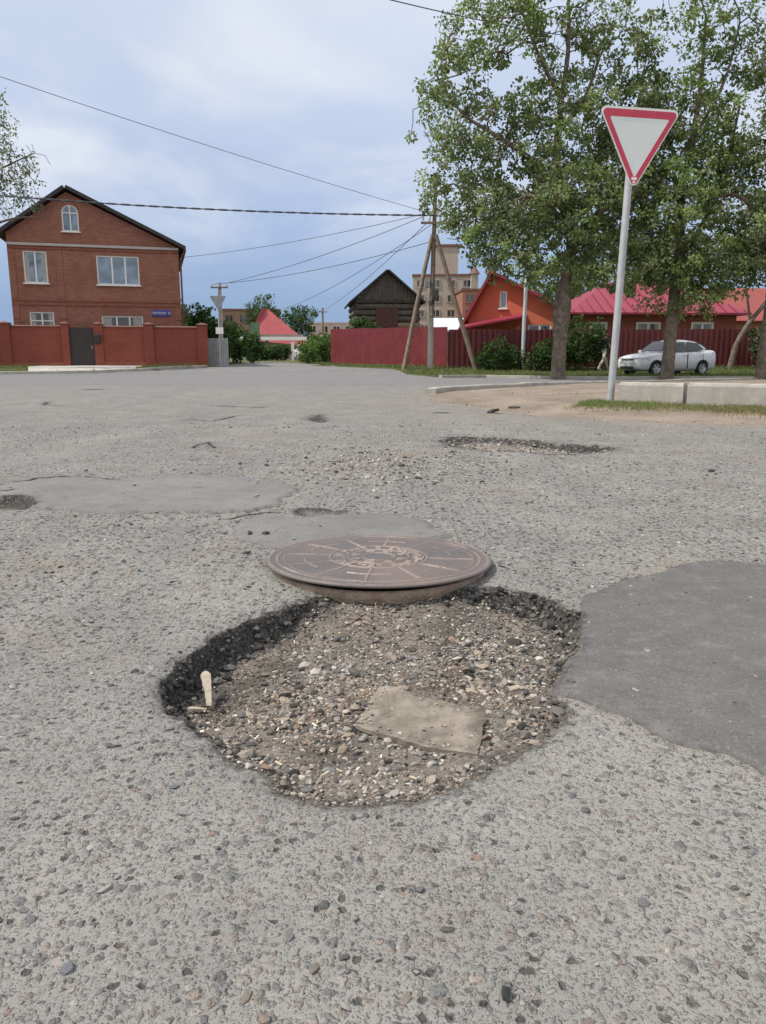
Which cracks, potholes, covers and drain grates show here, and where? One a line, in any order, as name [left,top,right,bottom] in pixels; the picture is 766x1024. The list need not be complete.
manhole cover [265,535,492,605]
pothole [308,415,327,423]
pothole [292,508,349,516]
pothole [157,587,585,809]
pothole [0,495,38,511]
pothole [435,436,618,455]
